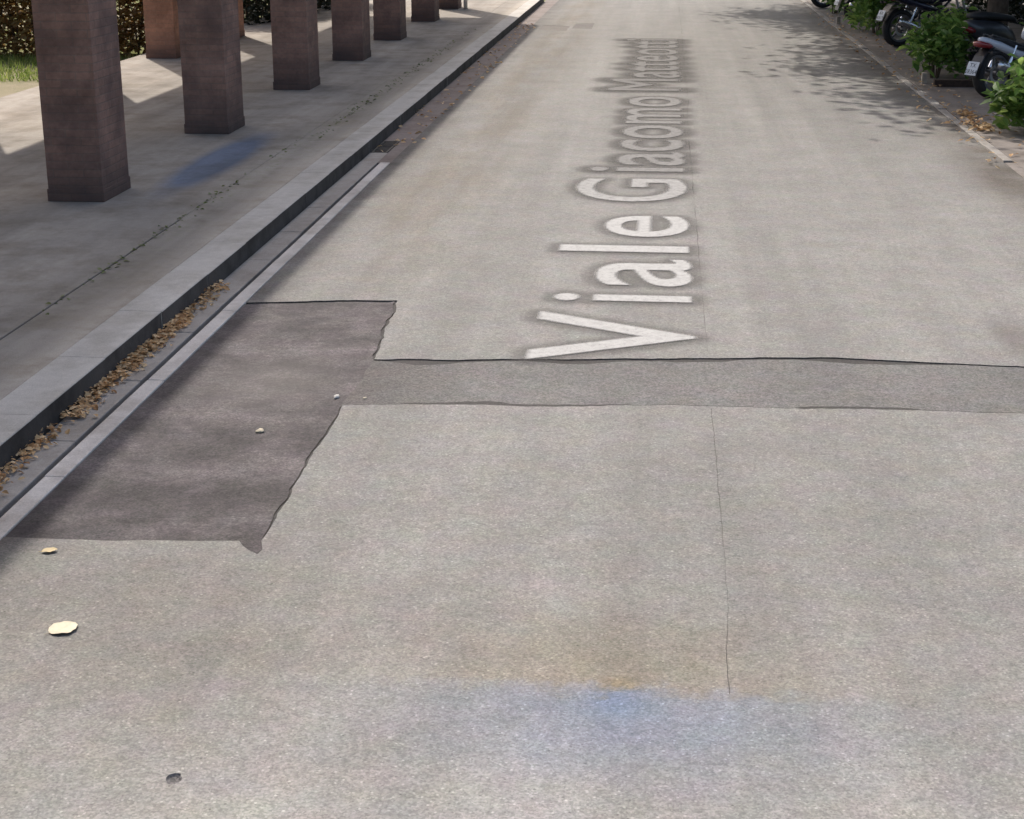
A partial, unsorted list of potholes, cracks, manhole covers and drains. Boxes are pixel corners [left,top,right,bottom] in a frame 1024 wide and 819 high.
drain grate [371,141,399,153]
pothole [166,773,182,784]
